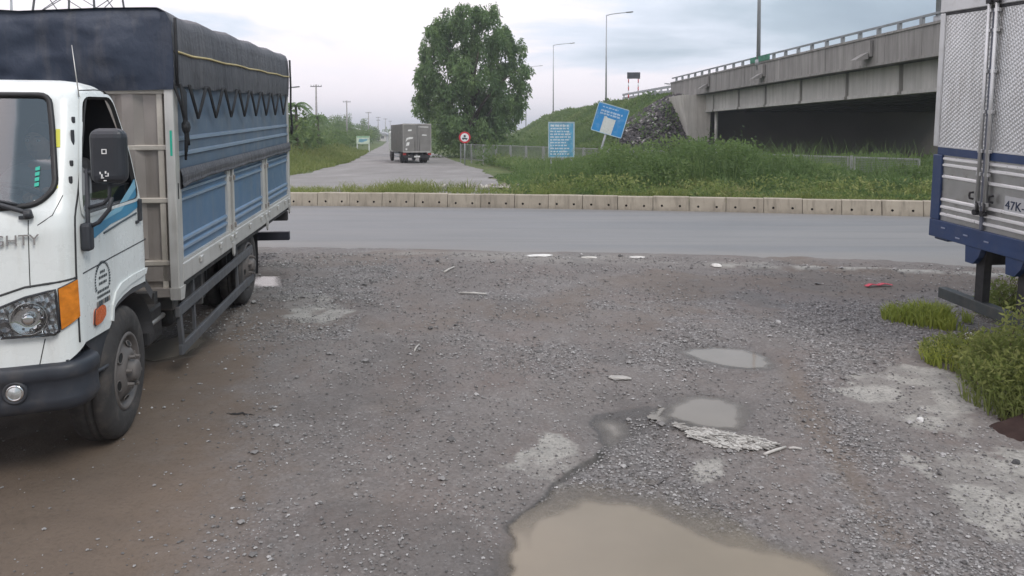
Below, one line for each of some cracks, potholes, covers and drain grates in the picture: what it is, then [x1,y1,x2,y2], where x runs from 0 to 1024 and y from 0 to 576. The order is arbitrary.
pothole [667,343,786,374]
pothole [491,401,862,576]
pothole [647,389,764,434]
